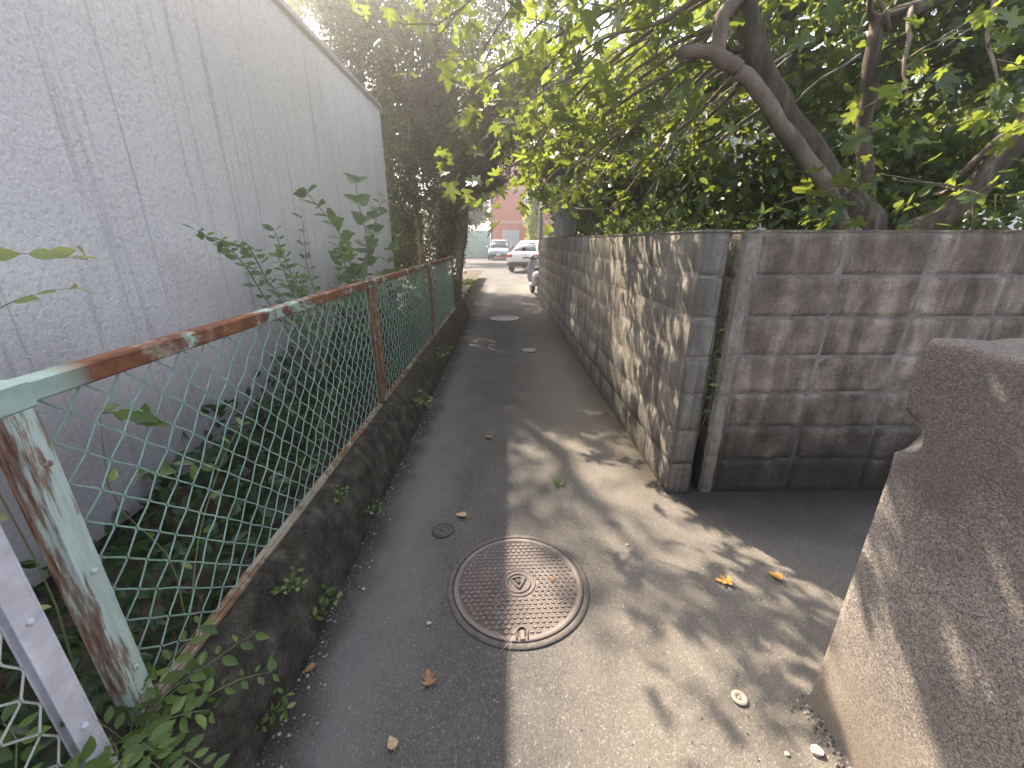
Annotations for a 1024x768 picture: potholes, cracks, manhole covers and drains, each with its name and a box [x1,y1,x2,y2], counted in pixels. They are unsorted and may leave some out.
manhole cover [447,535,590,650]
utility cover [432,523,454,538]
